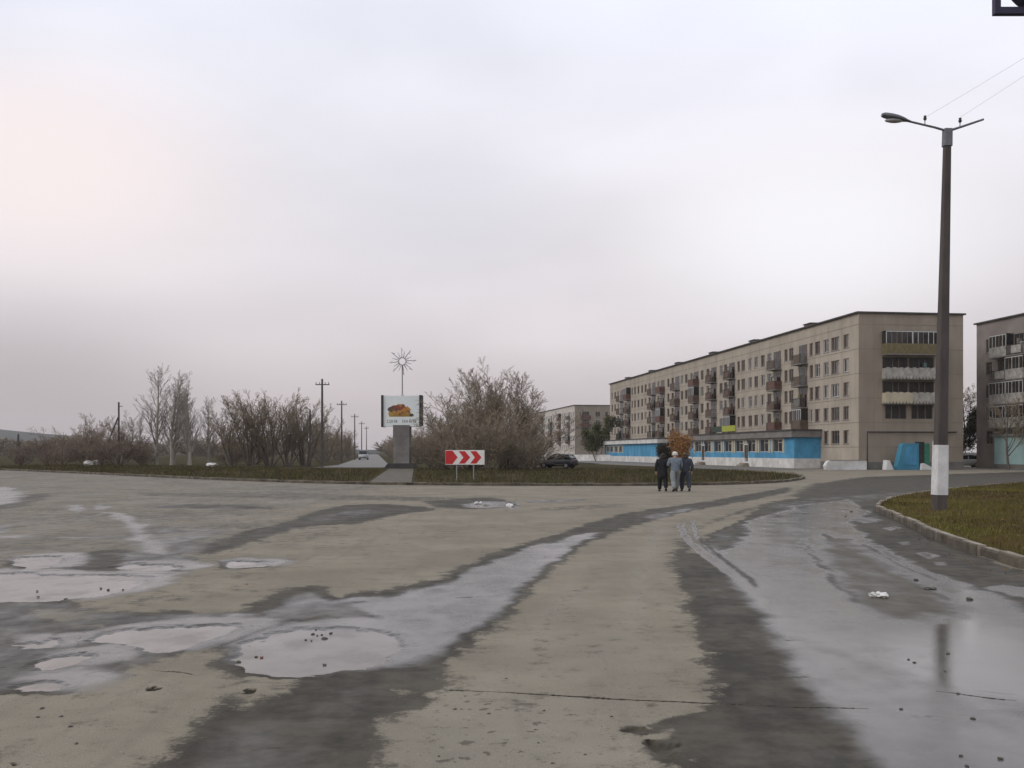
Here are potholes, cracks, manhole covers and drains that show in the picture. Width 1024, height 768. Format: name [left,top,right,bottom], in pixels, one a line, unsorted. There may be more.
pothole [193,621,437,685]
pothole [71,620,274,662]
pothole [596,721,677,741]
pothole [444,501,518,509]
pothole [198,558,294,571]
